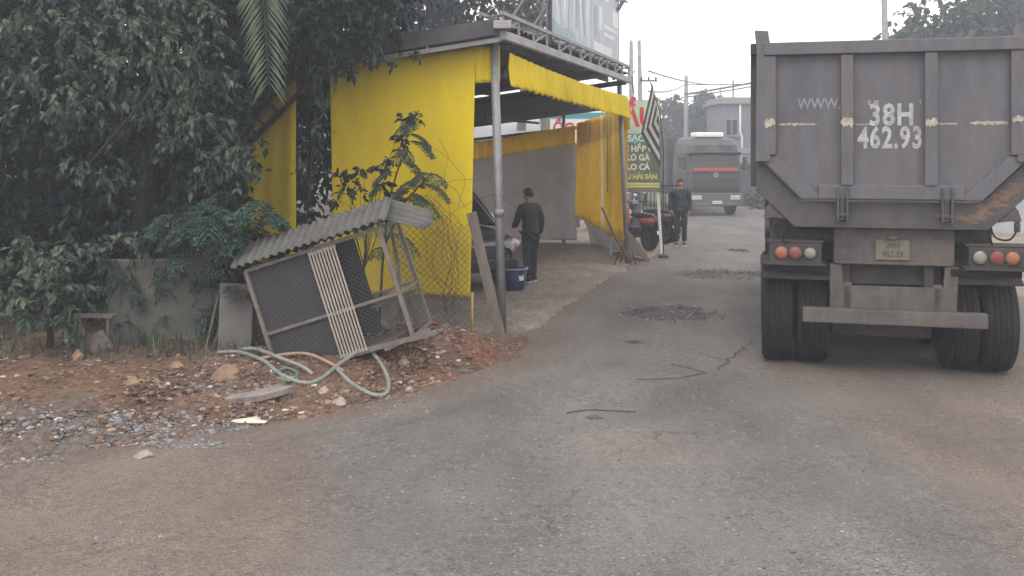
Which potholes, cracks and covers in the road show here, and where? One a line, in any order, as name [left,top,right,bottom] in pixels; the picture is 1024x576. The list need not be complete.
pothole [673,269,761,279]
pothole [615,304,728,322]
